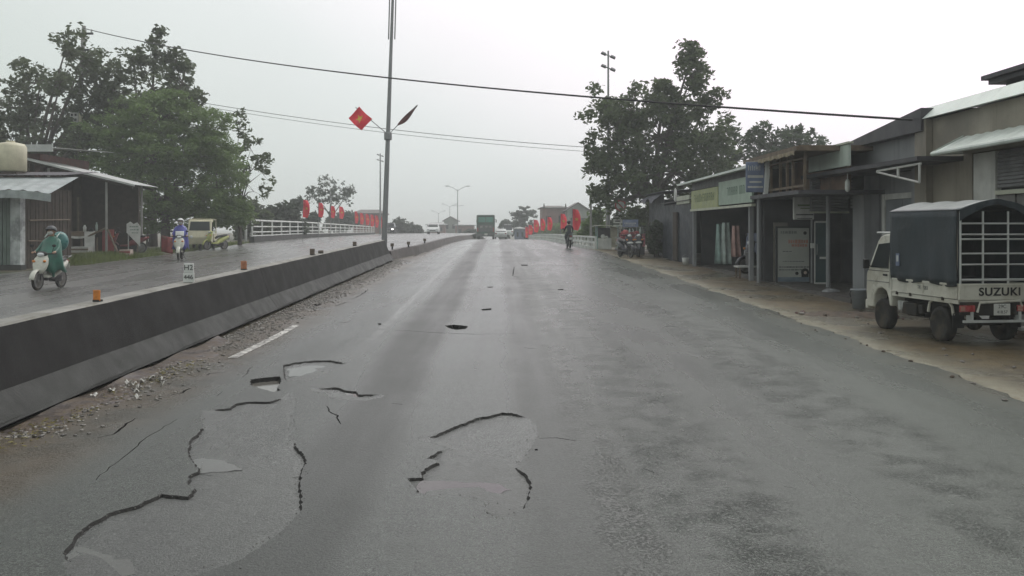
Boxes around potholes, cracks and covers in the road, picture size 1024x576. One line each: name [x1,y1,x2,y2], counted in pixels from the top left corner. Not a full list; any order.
pothole [250,376,281,392]
crack [96,418,172,480]
pothole [283,360,348,381]
